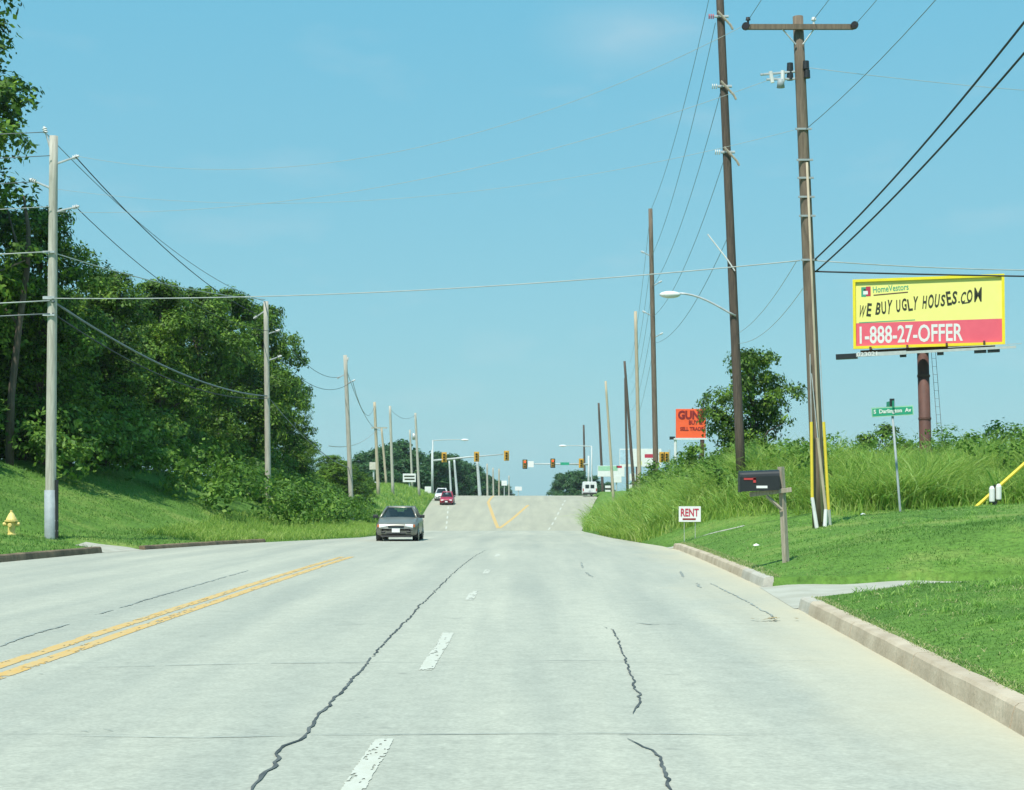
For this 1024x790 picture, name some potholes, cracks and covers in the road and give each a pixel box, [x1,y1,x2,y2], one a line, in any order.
crack [251,550,485,790]
crack [628,738,672,790]
crack [680,571,775,619]
crack [603,622,680,713]
